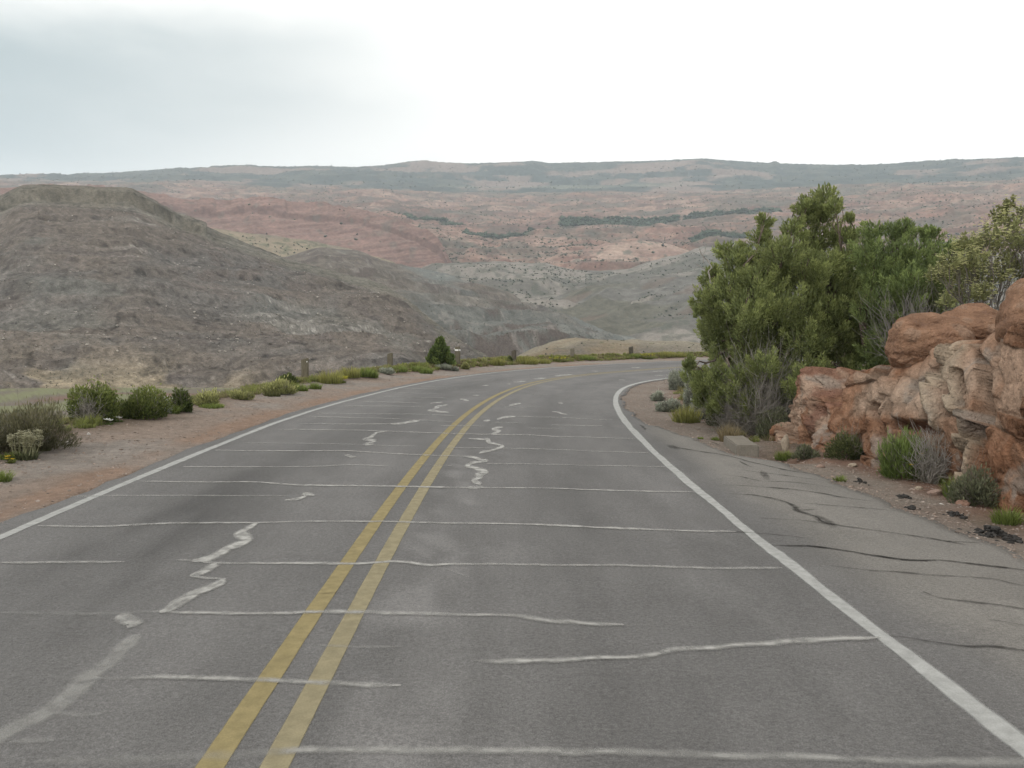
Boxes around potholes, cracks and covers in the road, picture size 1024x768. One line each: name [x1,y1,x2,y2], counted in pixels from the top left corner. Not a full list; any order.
crack [673,439,1022,584]
